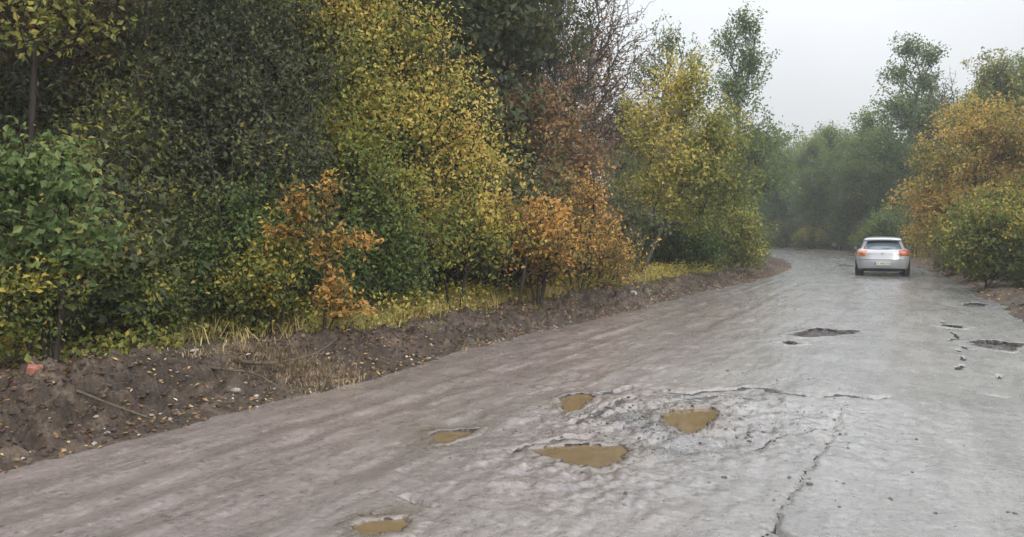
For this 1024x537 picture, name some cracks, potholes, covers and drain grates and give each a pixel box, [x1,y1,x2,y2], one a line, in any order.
pothole [513,439,641,474]
pothole [777,327,868,338]
pothole [329,511,432,537]
pothole [549,391,602,416]
pothole [416,426,488,446]
crack [671,387,887,537]
pothole [941,301,1009,309]
pothole [648,402,728,436]
pothole [953,338,1024,353]
